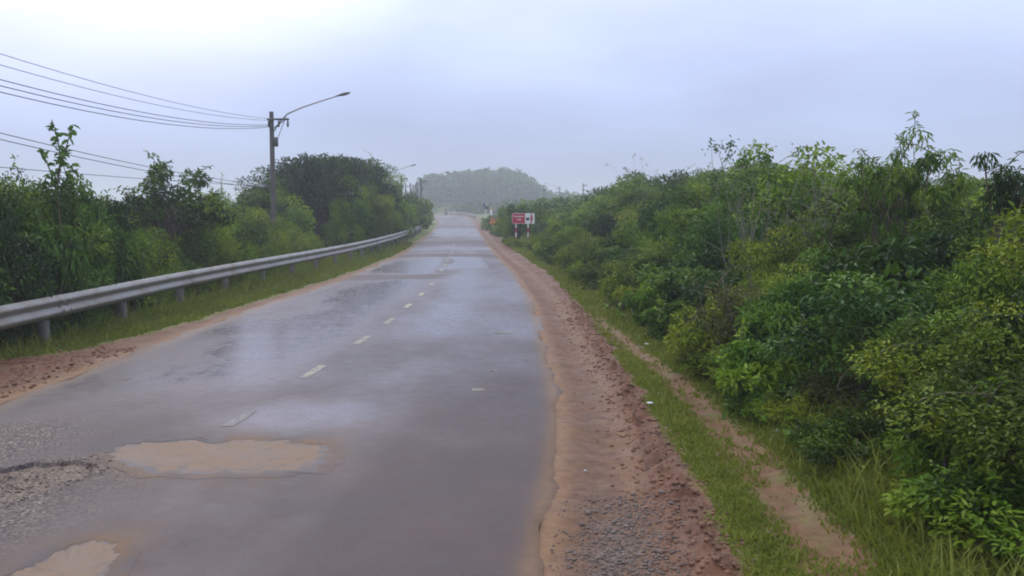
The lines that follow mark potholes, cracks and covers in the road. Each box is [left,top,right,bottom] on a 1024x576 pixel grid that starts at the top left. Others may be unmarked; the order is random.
pothole [0,532,142,576]
pothole [89,435,349,479]
